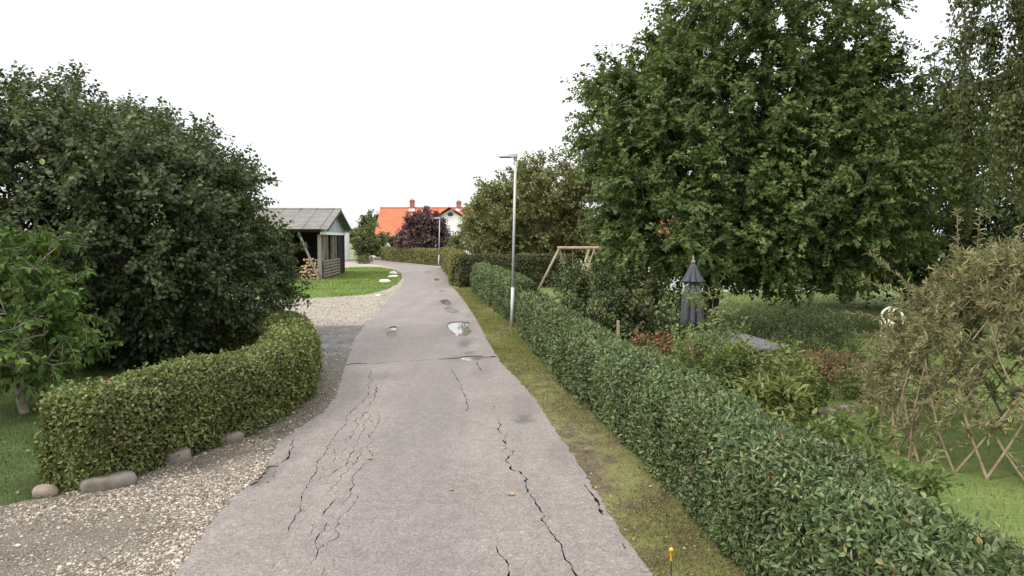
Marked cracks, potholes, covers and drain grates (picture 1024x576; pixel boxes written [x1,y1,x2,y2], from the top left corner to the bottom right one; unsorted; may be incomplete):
pothole [447,322,472,336]
crack [287,358,469,565]
crack [494,407,576,575]
